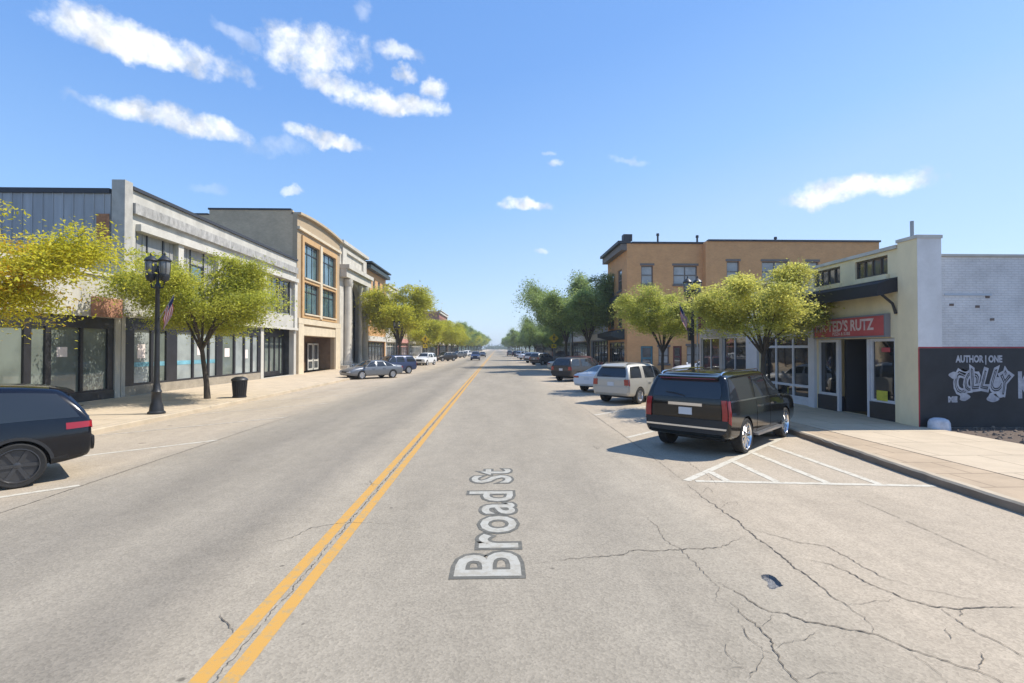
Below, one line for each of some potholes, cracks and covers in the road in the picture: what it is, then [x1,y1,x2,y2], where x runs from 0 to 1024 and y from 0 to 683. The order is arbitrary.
crack [540,461,1021,655]
crack [719,582,1003,683]
pothole [761,574,783,589]
